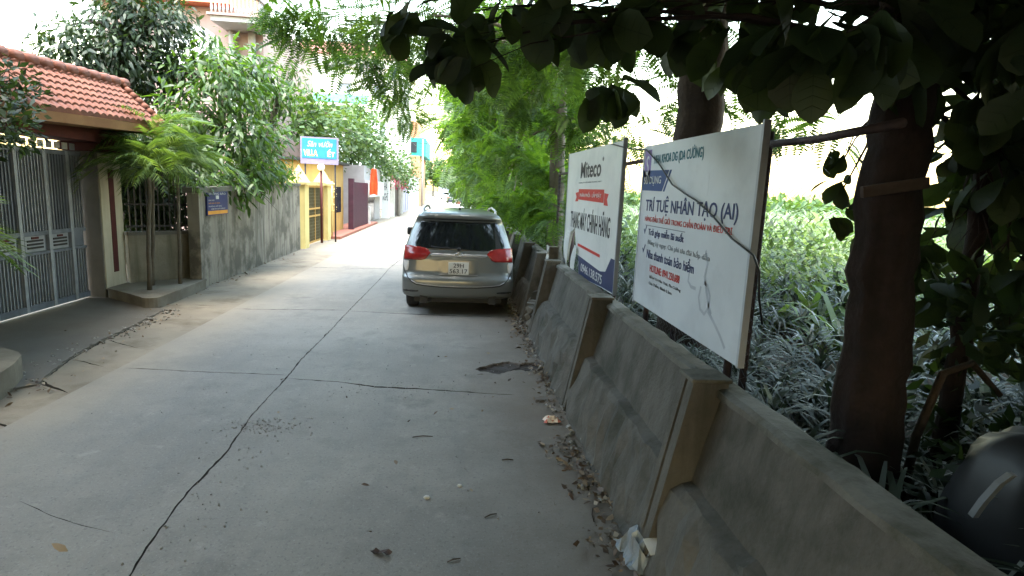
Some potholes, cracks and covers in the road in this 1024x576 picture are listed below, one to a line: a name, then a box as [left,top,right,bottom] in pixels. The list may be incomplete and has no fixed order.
crack [42,320,147,392]
pothole [475,361,540,374]
crack [129,258,510,576]
